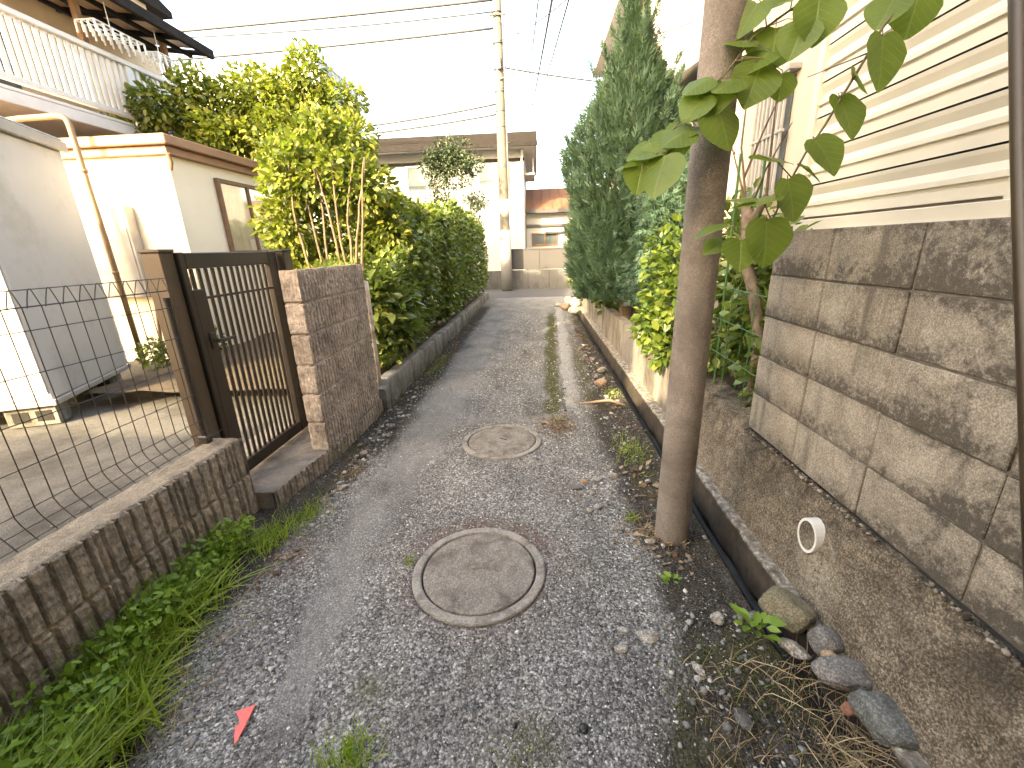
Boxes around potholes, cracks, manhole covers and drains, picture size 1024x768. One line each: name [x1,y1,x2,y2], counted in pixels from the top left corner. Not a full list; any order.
manhole cover [412,528,546,628]
manhole cover [462,424,542,460]
